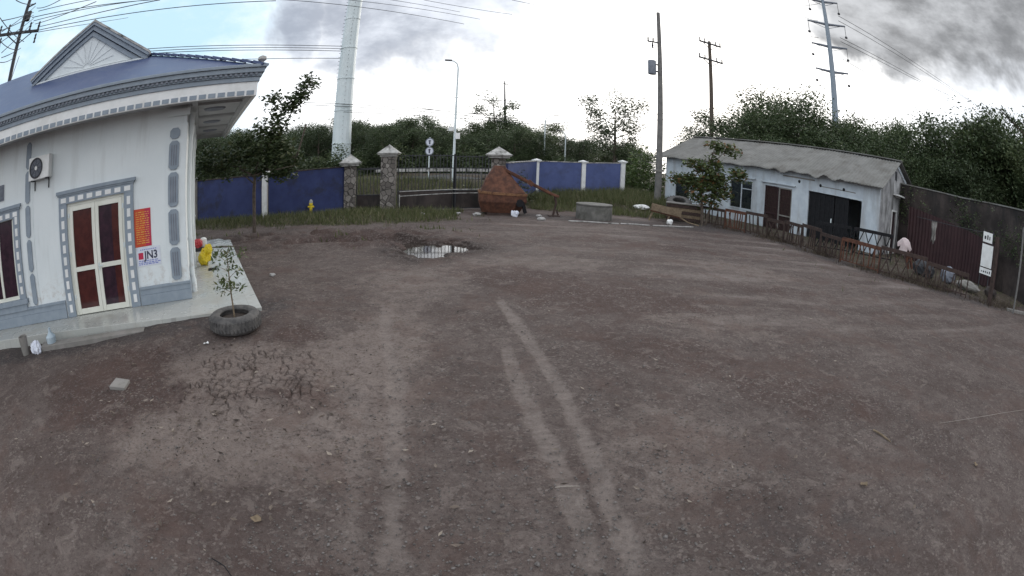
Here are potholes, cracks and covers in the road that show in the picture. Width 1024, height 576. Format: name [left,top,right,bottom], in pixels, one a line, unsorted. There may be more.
pothole [382,232,495,262]
crack [165,338,396,439]
